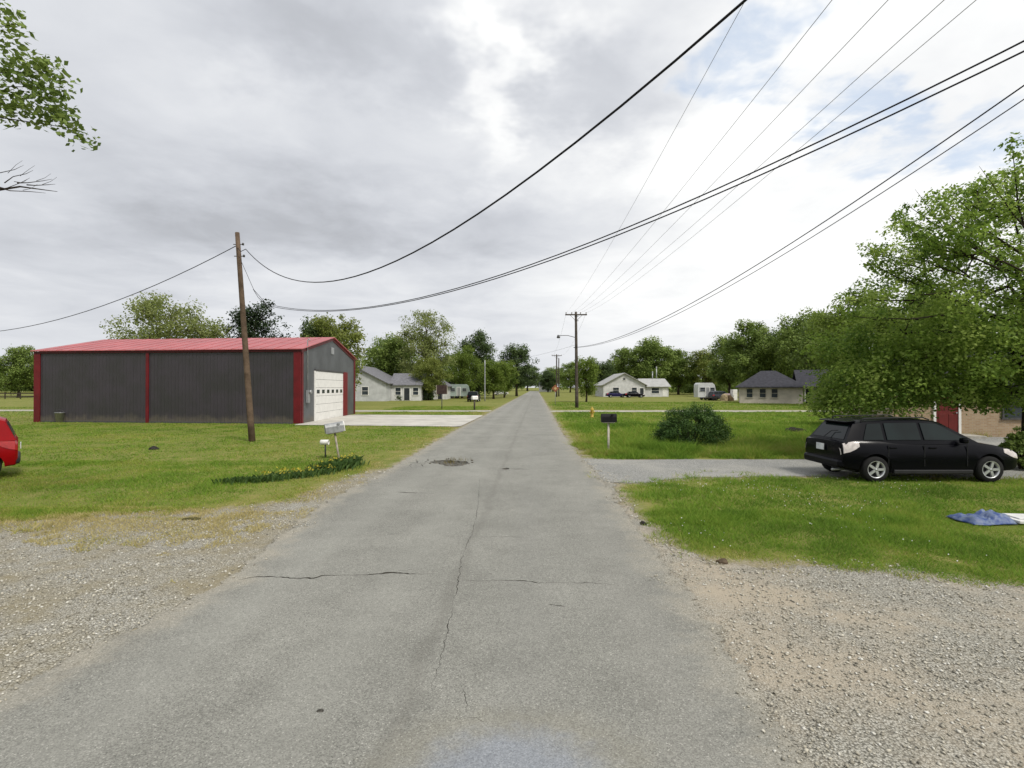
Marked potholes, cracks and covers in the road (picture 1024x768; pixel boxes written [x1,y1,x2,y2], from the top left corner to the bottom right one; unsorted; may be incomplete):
crack [420,485,619,728]
crack [239,569,414,580]
pothole [429,456,473,466]
